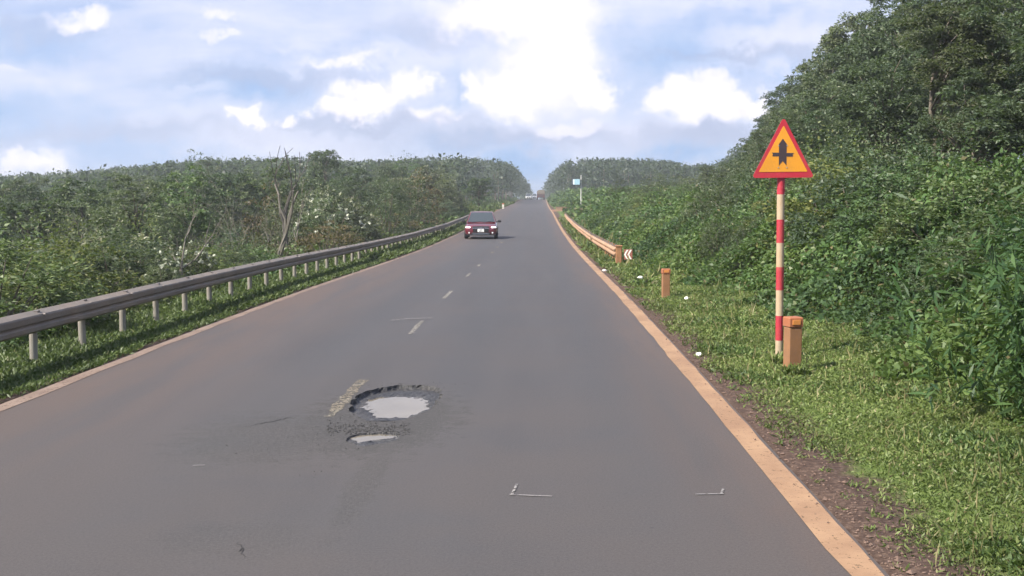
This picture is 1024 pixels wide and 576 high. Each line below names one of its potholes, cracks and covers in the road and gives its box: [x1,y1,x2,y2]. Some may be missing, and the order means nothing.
pothole [348,385,443,421]
pothole [346,432,400,446]
